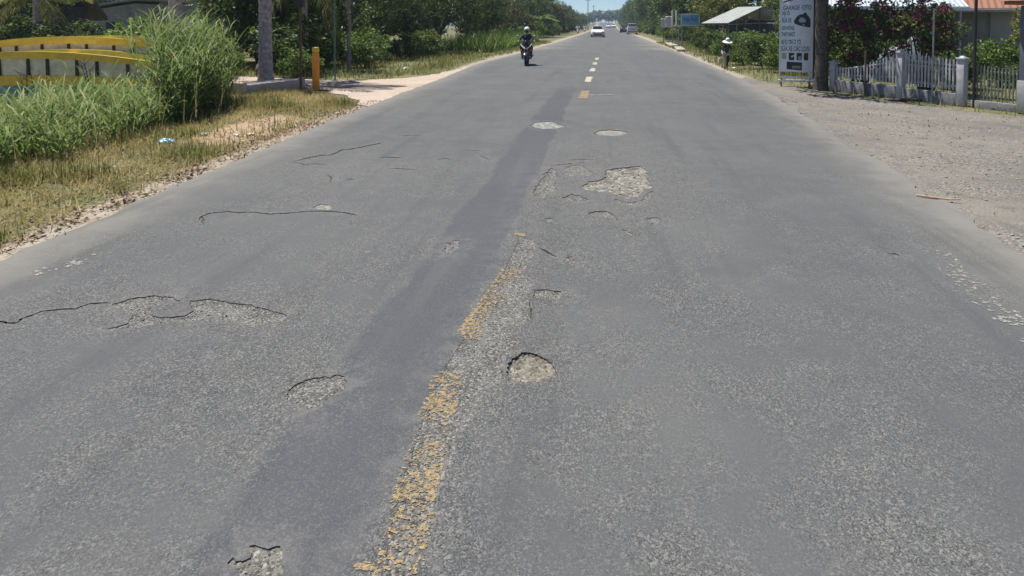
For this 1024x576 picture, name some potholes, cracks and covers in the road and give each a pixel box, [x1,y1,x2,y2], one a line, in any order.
crack [0,302,107,324]
pothole [269,370,367,418]
pothole [193,535,313,576]
pothole [532,168,564,198]
pothole [555,164,593,176]
pothole [523,287,574,304]
crack [198,211,358,224]
pothole [614,191,654,208]
pothole [579,166,657,199]
crack [297,135,418,182]
pothole [493,346,567,386]
